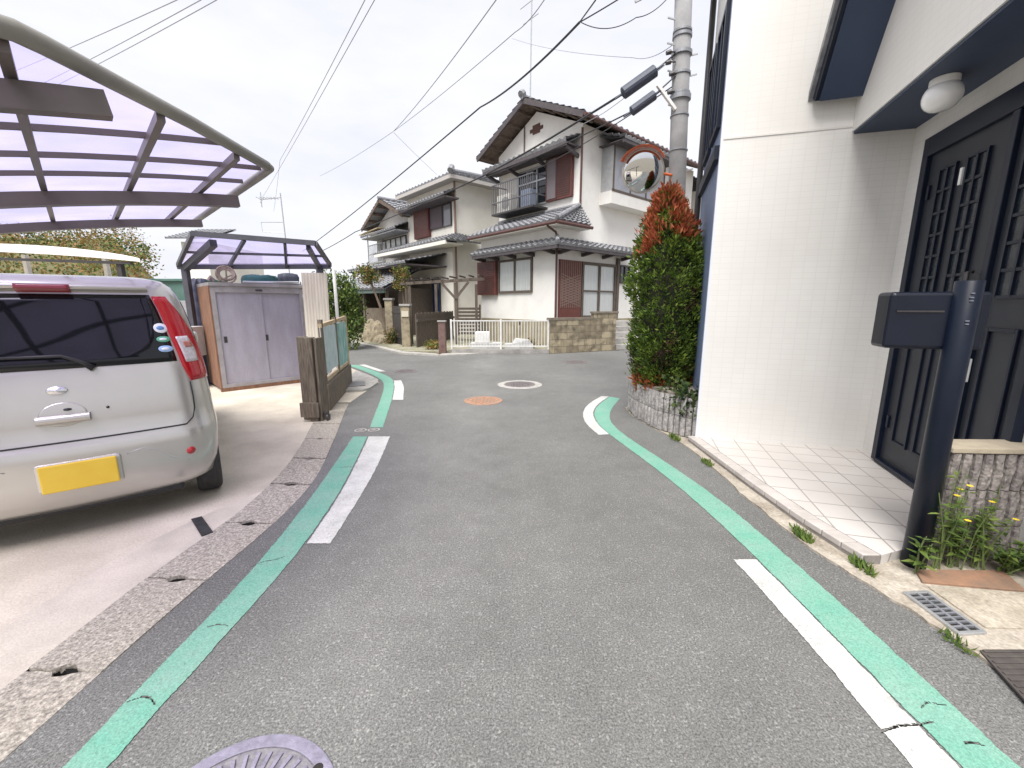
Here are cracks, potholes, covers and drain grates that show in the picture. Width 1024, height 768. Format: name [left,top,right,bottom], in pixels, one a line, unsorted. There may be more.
manhole cover [464,396,502,405]
drain grate [903,590,987,636]
pothole [53,668,78,677]
manhole cover [192,734,334,768]
crack [881,702,945,733]
manhole cover [498,380,542,389]
